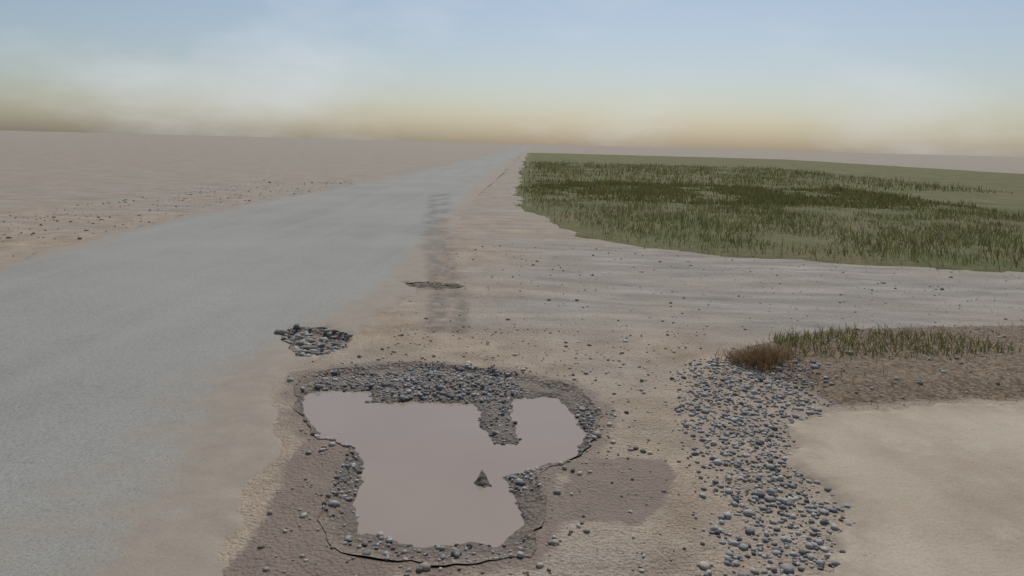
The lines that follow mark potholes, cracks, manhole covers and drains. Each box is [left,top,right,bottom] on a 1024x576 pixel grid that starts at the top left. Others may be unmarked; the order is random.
pothole [293,361,603,565]
pothole [281,327,353,357]
